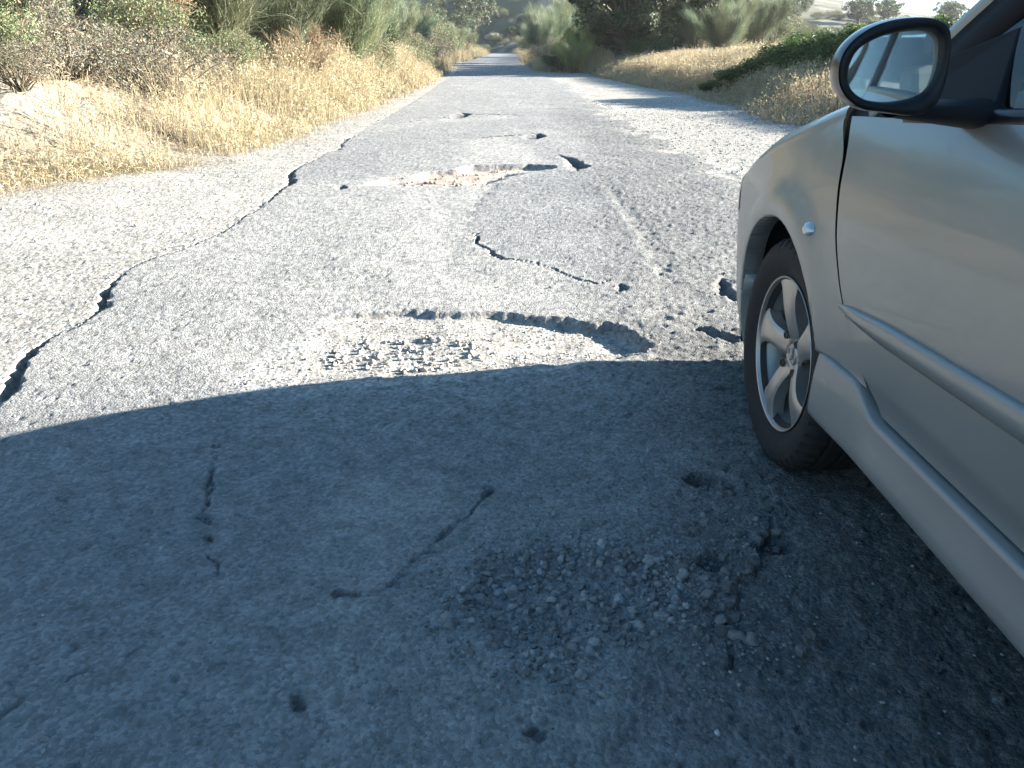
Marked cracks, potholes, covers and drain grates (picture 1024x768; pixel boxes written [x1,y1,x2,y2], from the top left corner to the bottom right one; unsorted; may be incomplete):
pothole [693,326,741,344]
pothole [449,538,724,681]
pothole [693,549,736,575]
pothole [557,154,592,172]
pothole [745,530,806,560]
pothole [205,307,655,402]
crack [192,405,224,581]
pothole [286,692,312,716]
pothole [710,277,737,302]
crack [328,487,497,599]
crack [468,233,611,284]
pothole [679,470,727,490]
